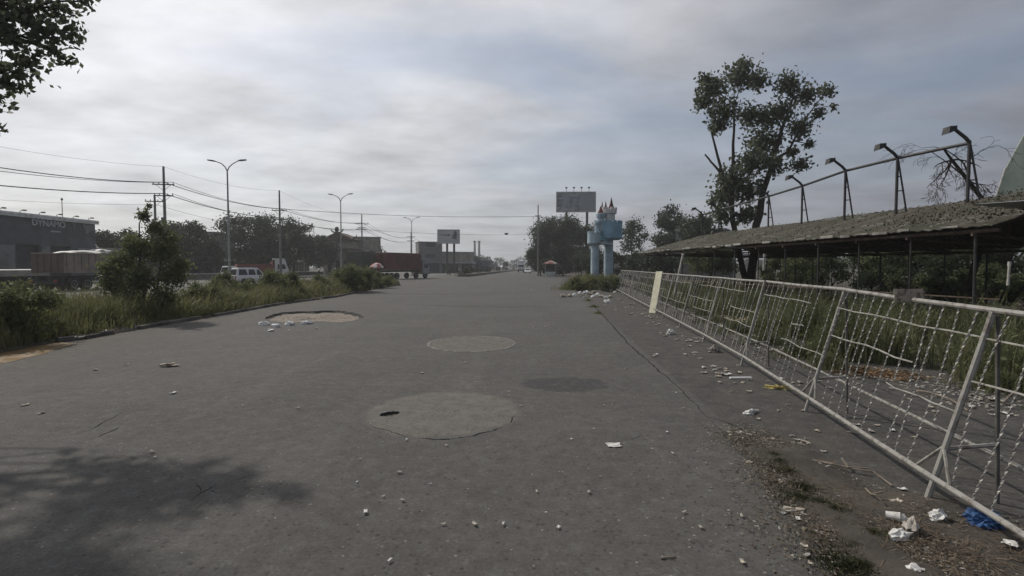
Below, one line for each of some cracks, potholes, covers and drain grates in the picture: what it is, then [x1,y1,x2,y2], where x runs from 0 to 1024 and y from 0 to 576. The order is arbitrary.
pothole [265,310,364,322]
